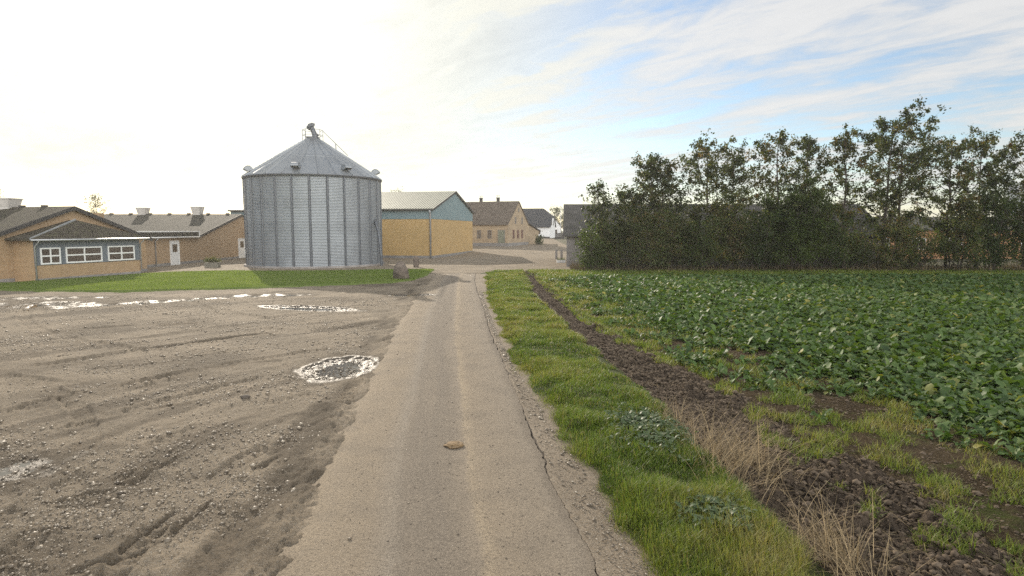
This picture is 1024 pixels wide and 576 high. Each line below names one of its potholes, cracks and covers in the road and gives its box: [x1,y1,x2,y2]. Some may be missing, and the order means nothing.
crack [474,275,599,576]
pothole [297,355,380,383]
